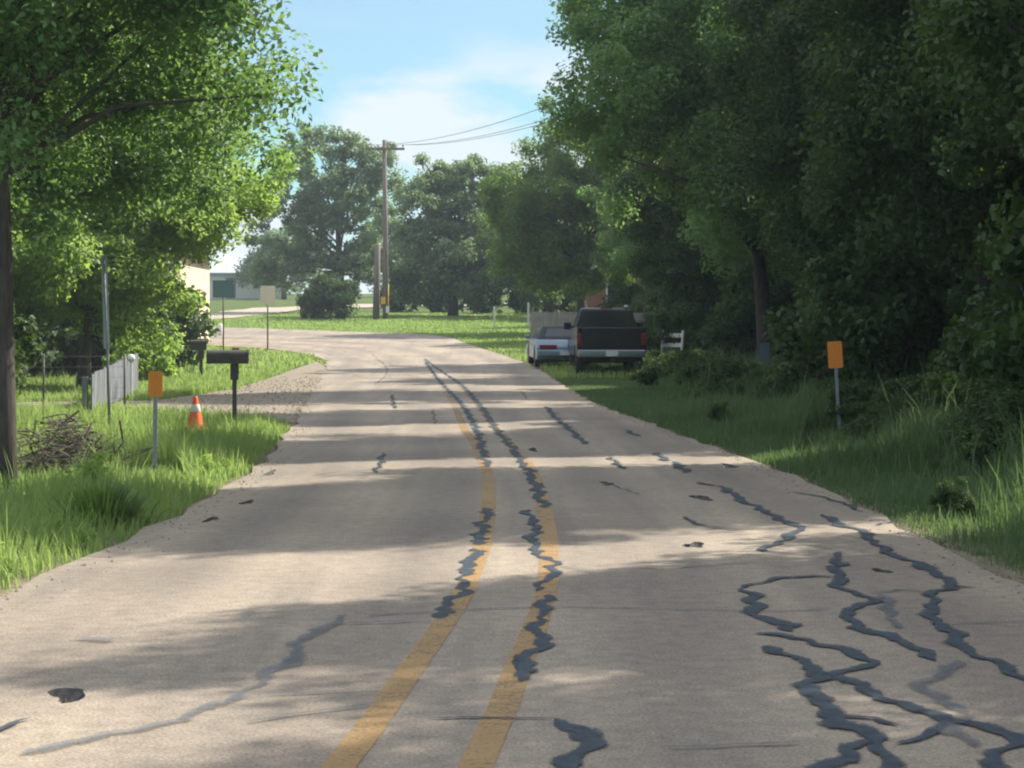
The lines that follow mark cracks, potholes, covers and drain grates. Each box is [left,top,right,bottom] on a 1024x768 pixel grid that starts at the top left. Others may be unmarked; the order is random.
pothole [47,688,85,703]
